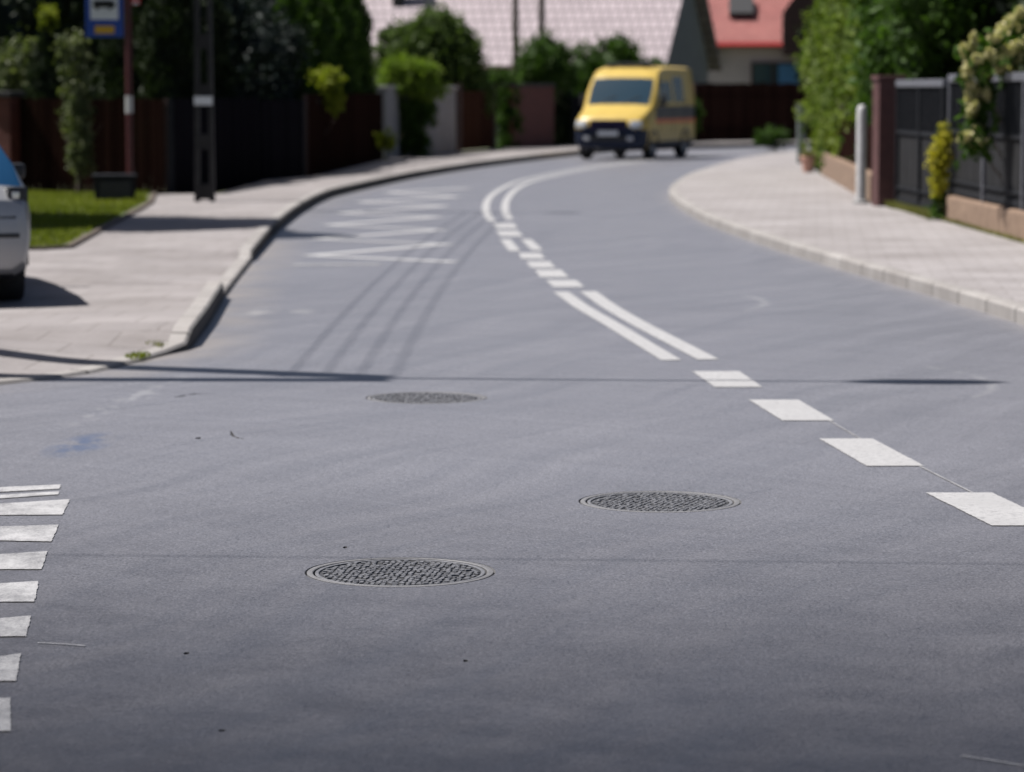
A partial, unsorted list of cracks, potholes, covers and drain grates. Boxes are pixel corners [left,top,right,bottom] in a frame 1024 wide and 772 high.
manhole cover [578,491,742,513]
manhole cover [305,557,496,587]
manhole cover [366,392,488,404]
